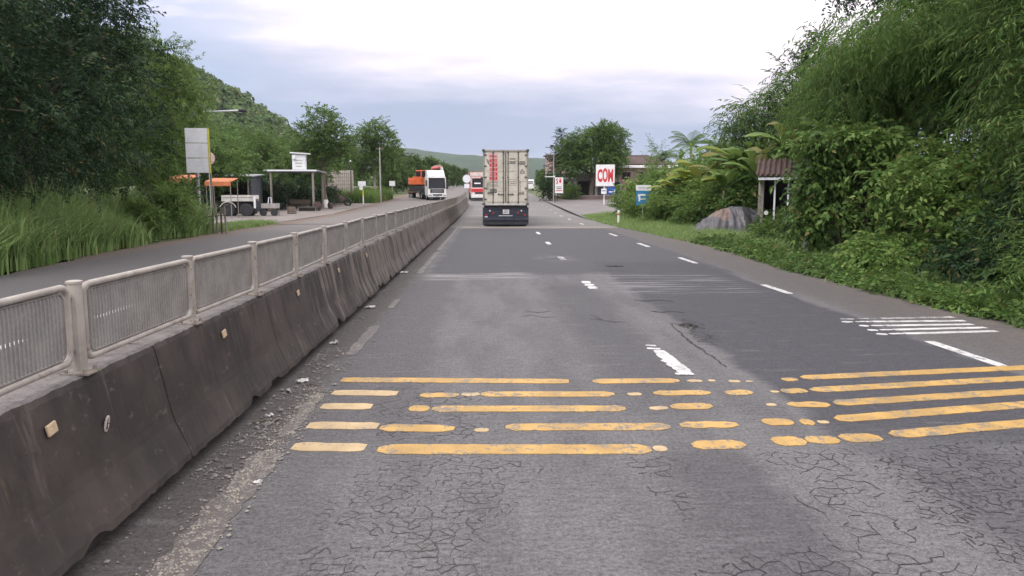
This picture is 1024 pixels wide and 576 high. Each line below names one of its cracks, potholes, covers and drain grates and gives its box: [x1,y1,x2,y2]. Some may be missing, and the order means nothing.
crack [694,448,978,576]
crack [626,456,693,520]
crack [871,440,1024,571]
crack [293,454,552,576]
crack [638,299,727,367]
